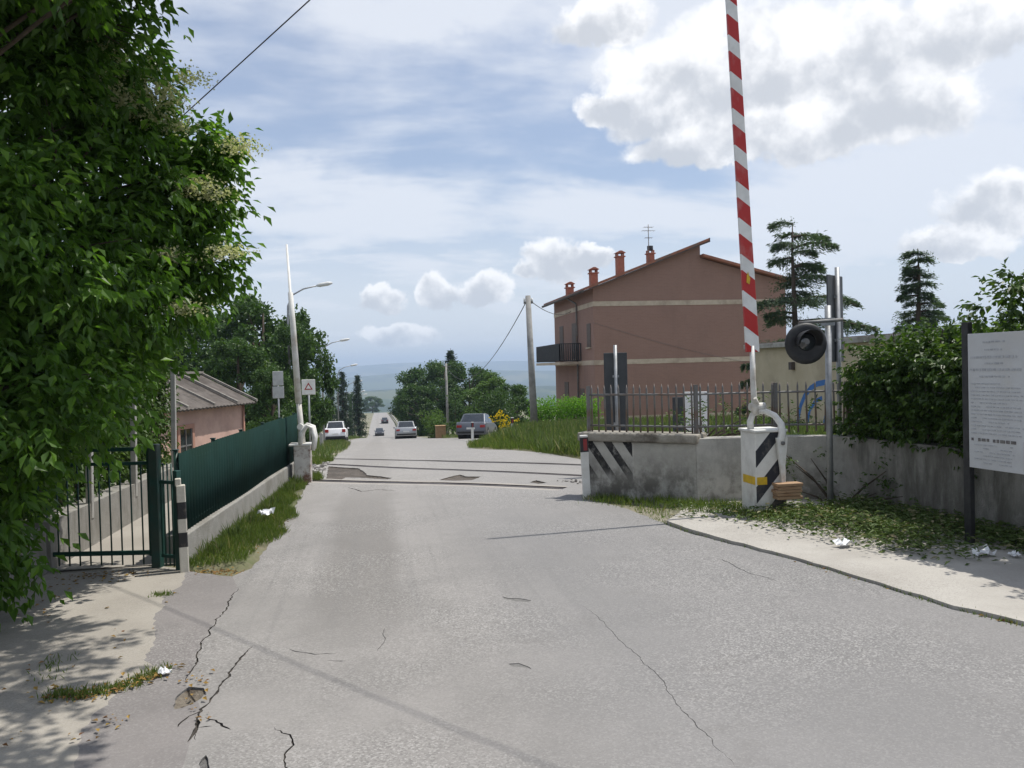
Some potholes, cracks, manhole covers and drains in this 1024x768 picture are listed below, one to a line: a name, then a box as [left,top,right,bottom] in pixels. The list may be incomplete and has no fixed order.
pothole [173,687,206,709]
crack [178,590,253,742]
pothole [327,466,390,481]
crack [274,727,295,768]
crack [586,607,734,764]
